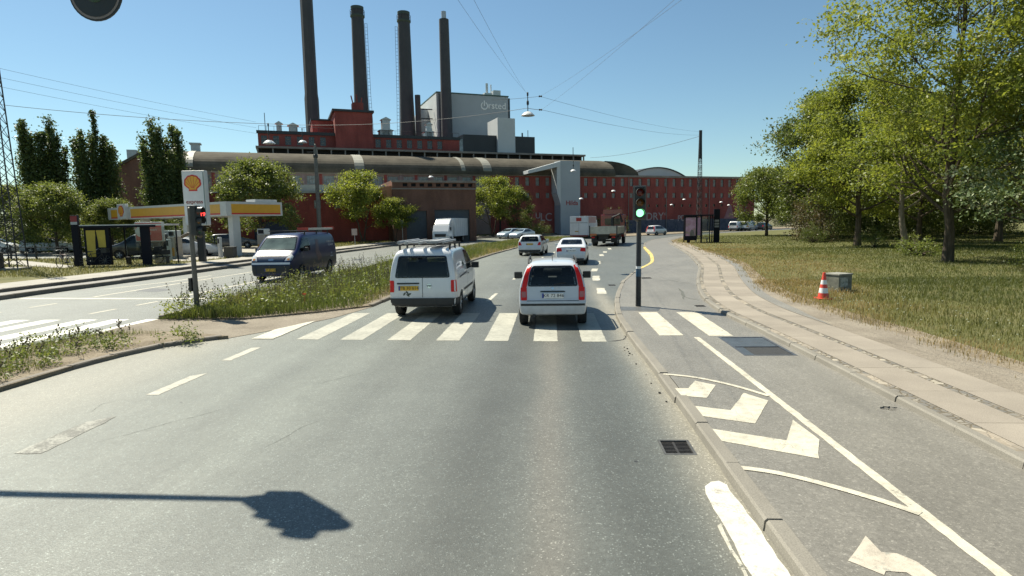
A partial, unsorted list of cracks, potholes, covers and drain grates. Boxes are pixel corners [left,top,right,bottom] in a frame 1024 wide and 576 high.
manhole cover [719,337,798,356]
drain grate [658,440,697,455]
